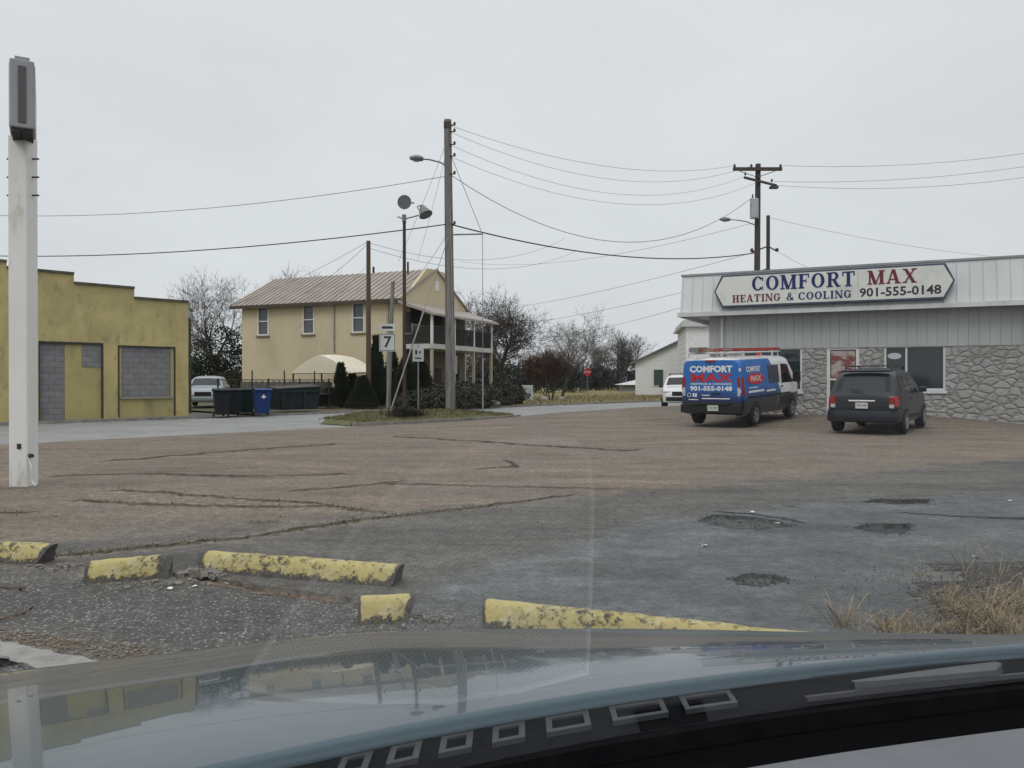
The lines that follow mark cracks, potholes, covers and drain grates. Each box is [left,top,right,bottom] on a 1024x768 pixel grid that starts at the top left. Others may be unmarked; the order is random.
pothole [726,572,795,588]
crack [0,435,642,557]
pothole [699,514,798,531]
pothole [846,522,918,535]
